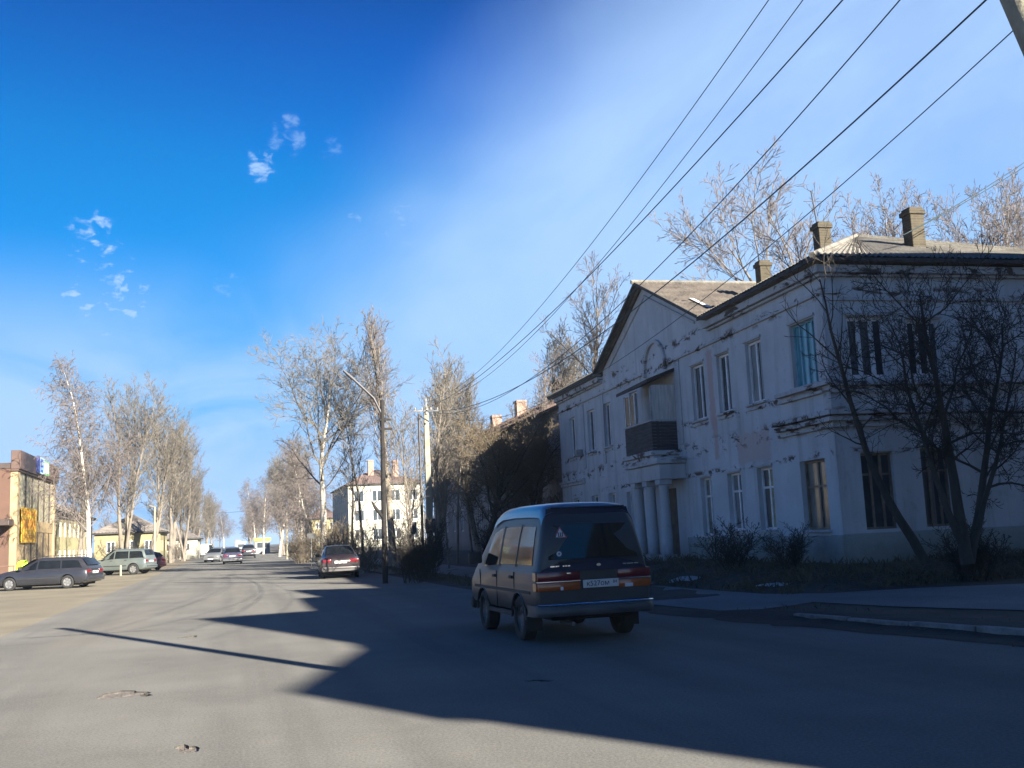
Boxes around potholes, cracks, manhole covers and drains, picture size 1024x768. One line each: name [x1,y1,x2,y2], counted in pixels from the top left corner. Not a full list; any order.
pothole [96,690,152,699]
pothole [174,744,200,753]
